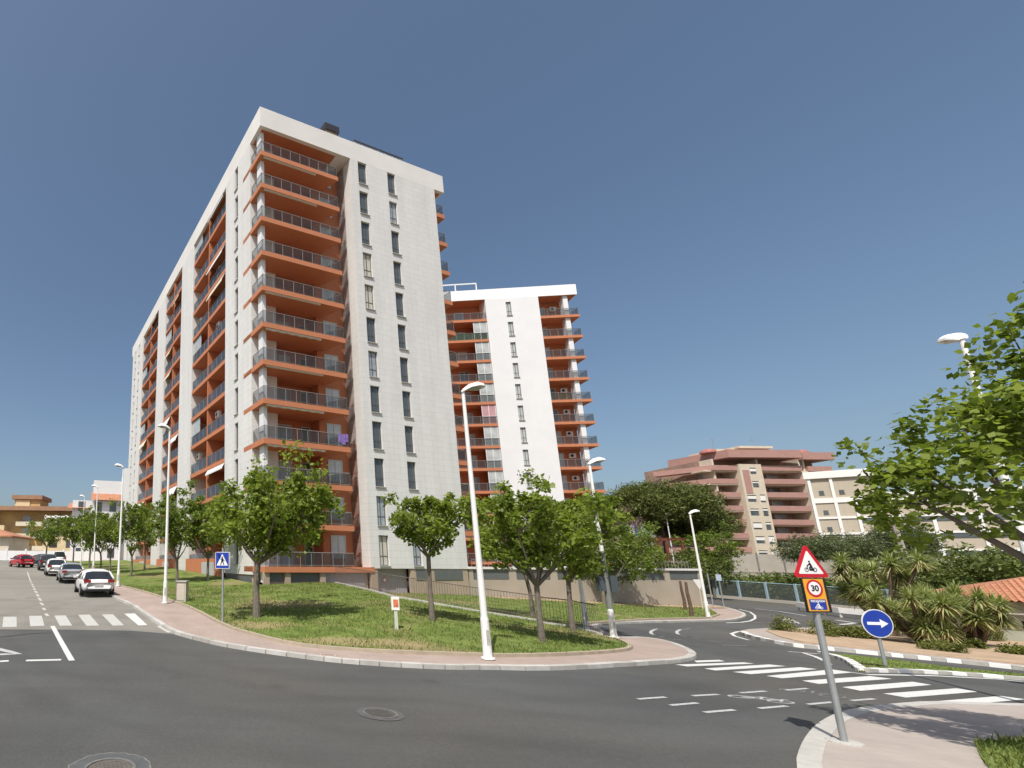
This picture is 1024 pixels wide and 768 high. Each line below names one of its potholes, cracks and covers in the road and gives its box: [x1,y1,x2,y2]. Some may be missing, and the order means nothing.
manhole cover [68,752,151,768]
manhole cover [356,707,405,721]
